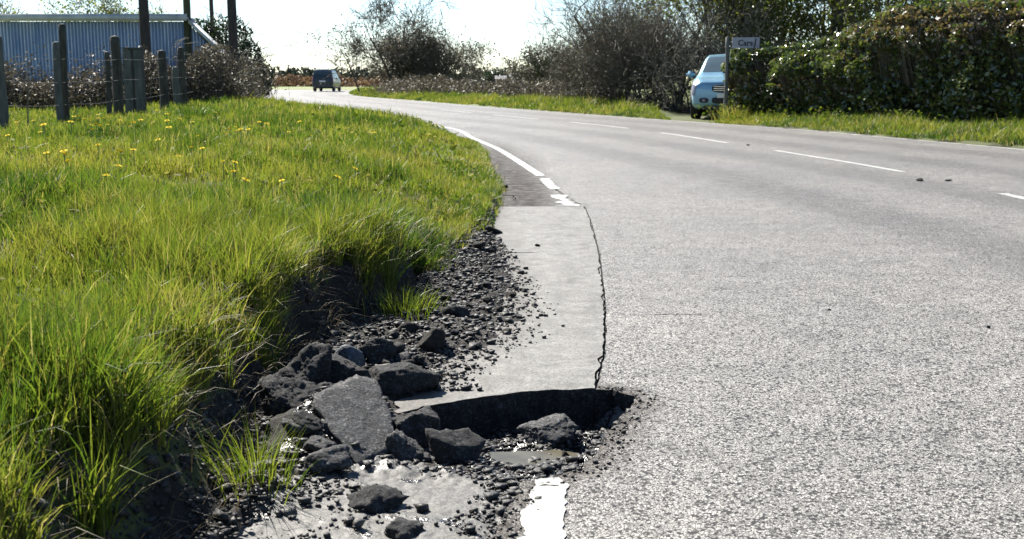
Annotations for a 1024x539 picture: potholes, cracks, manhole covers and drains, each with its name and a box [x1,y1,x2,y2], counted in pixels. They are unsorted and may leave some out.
pothole [229,388,636,539]
crack [502,183,607,389]
